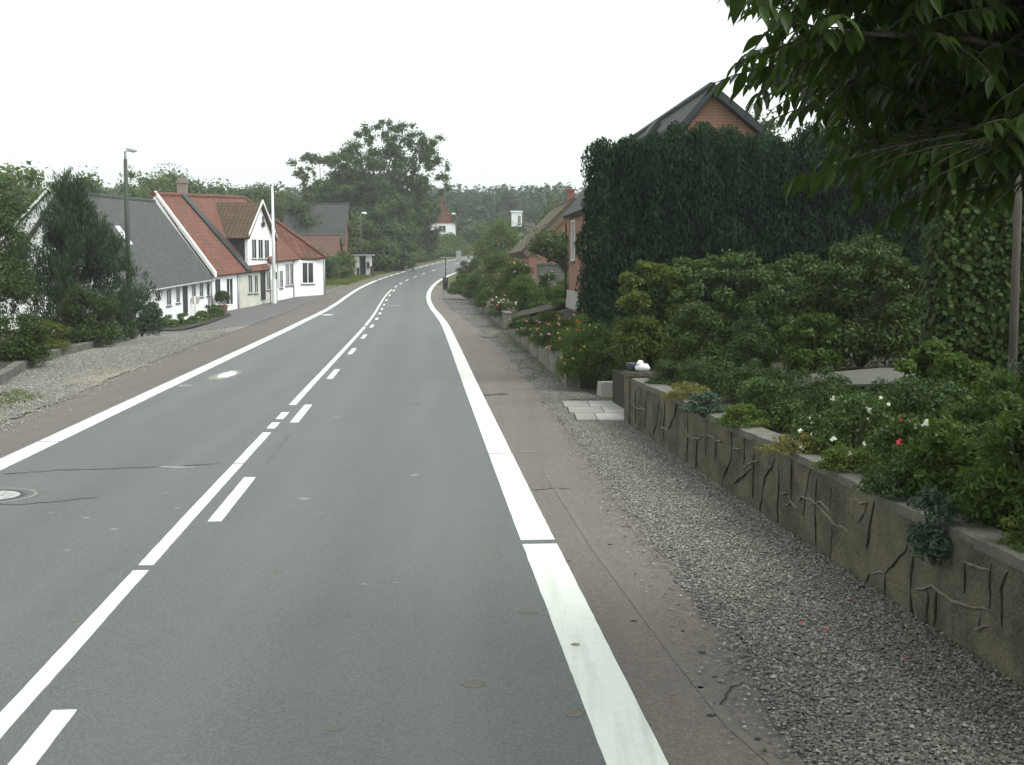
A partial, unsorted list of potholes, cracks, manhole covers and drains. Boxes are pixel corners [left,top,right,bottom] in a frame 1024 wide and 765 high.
manhole cover [0,488,38,503]
crack [719,681,744,705]
